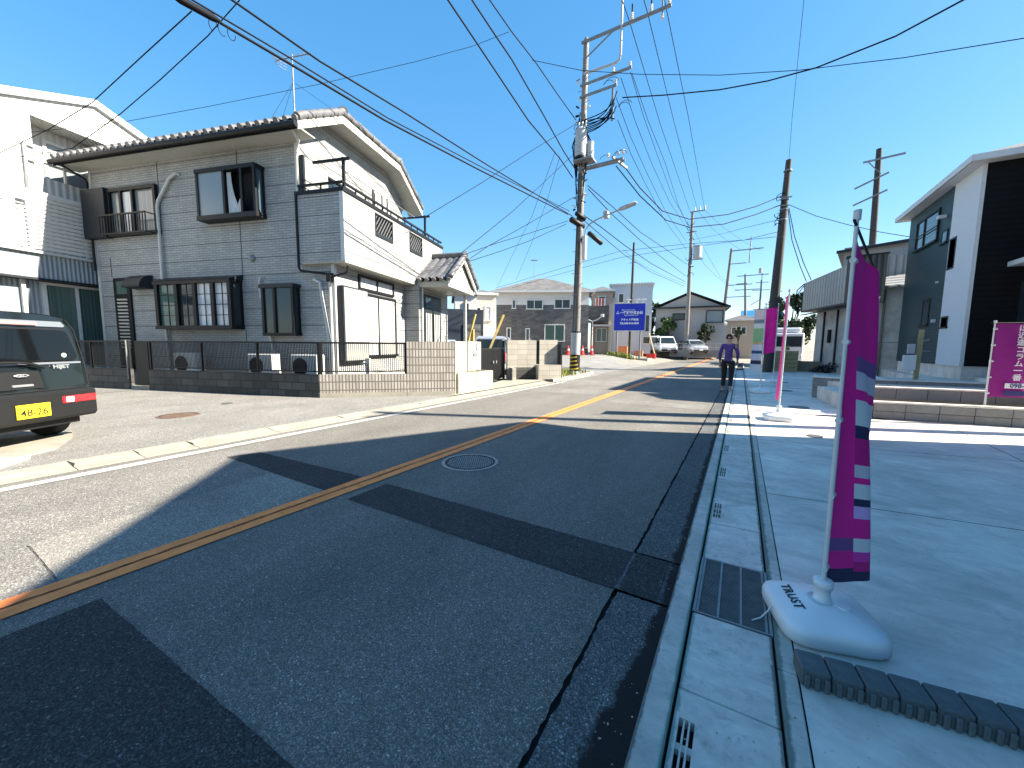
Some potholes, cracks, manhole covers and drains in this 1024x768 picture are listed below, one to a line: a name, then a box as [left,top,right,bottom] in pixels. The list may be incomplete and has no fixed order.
manhole cover [442,454,498,472]
crack [517,590,667,768]
drain grate [692,557,773,646]
